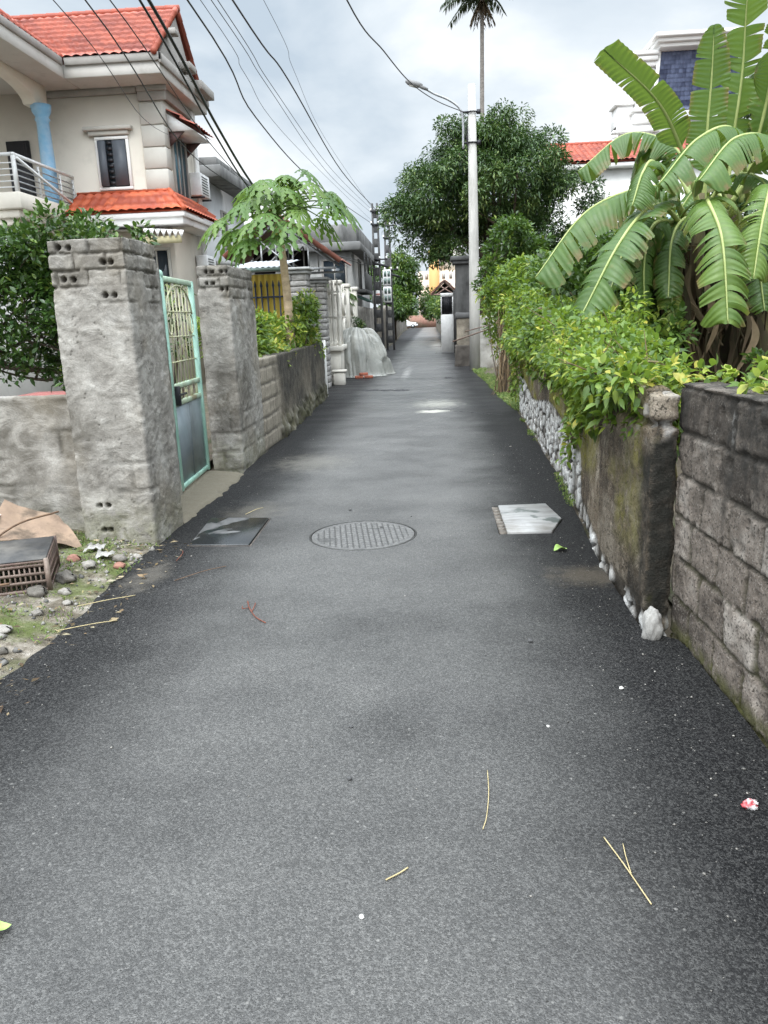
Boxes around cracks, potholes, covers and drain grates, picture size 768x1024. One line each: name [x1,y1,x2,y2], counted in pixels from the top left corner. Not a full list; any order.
manhole cover [309,521,417,551]
manhole cover [189,518,271,546]
